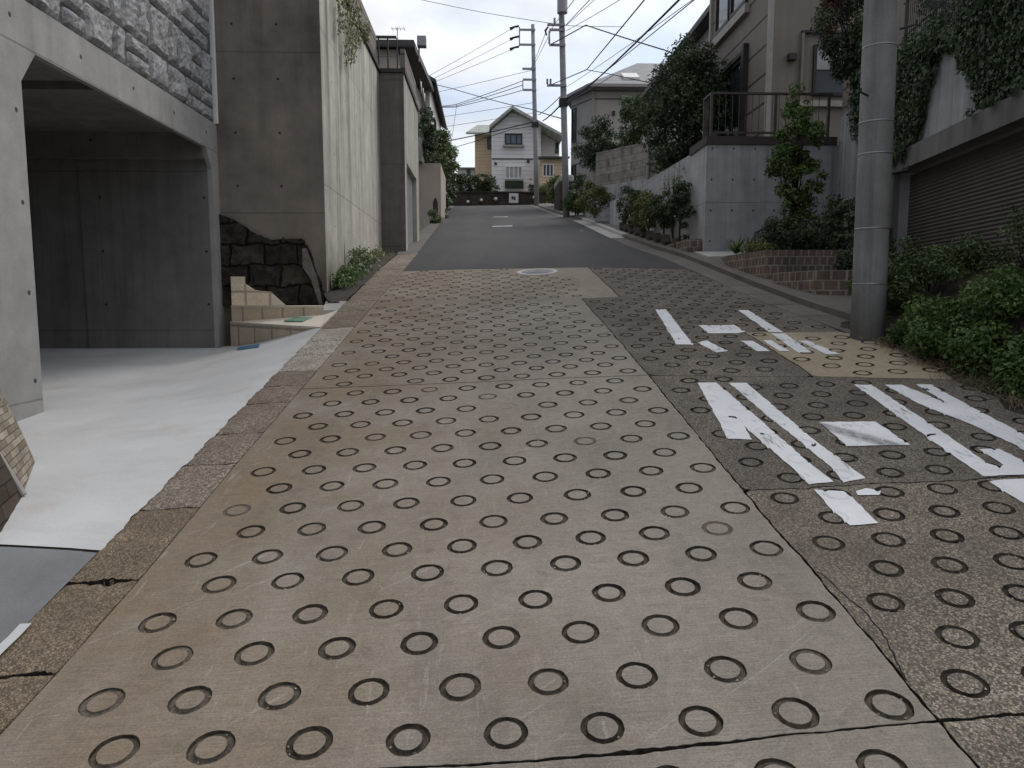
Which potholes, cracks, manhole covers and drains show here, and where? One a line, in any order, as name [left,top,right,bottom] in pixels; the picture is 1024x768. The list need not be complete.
crack [0,671,52,679]
crack [69,578,131,586]
